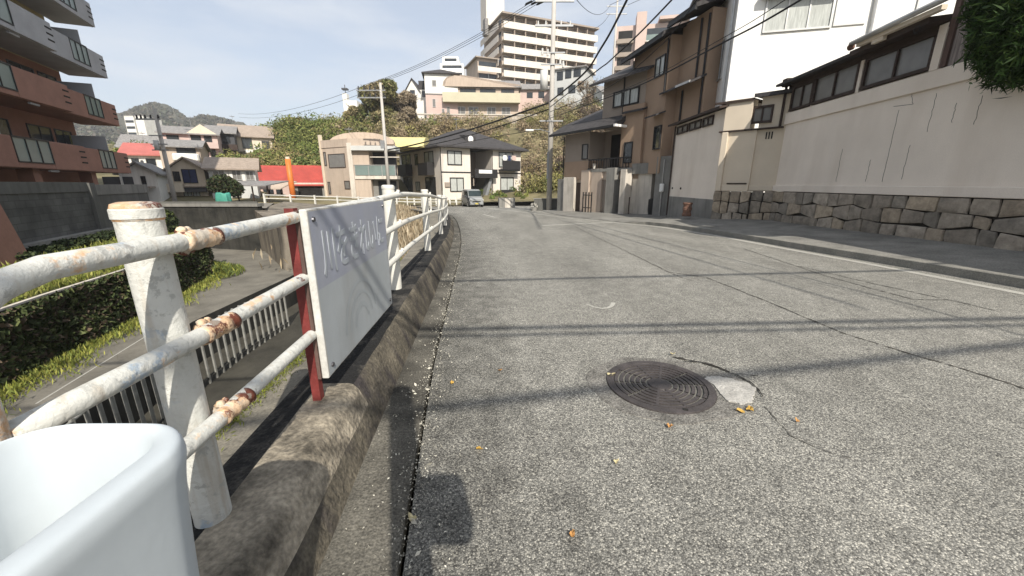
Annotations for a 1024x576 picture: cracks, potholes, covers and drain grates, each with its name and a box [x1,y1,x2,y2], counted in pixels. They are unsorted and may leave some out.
crack [673,356,851,458]
manhole cover [606,361,717,415]
